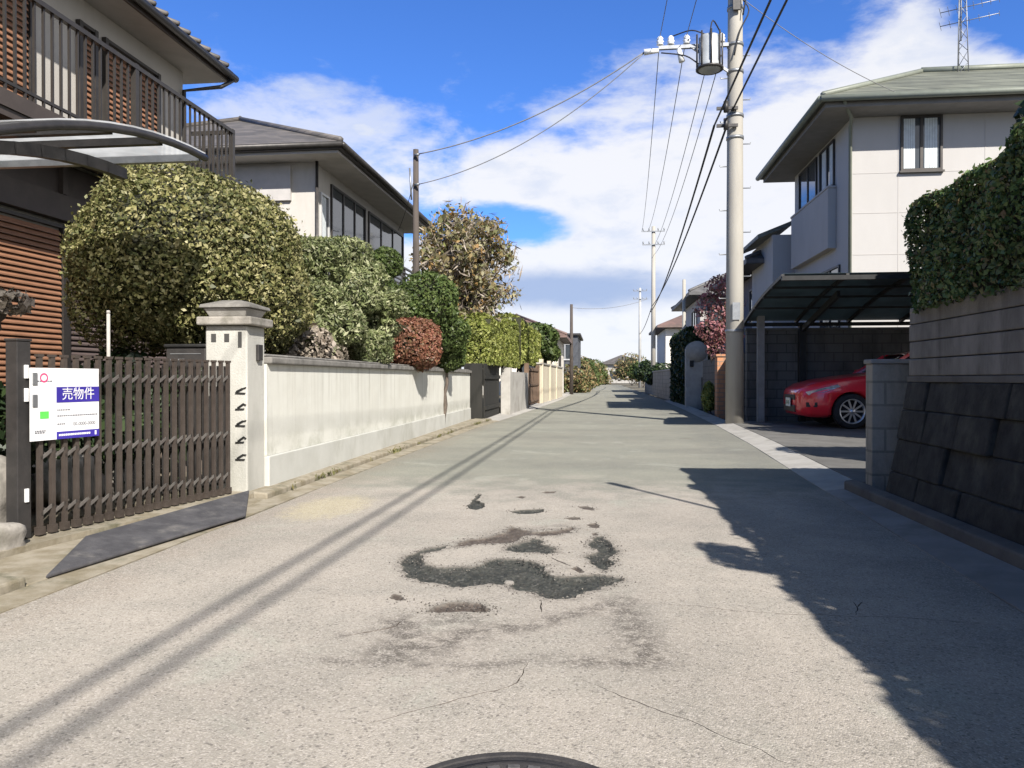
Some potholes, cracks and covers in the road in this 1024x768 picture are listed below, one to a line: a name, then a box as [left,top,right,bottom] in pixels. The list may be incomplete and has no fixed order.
pothole [429,602,491,613]
pothole [584,536,620,572]
pothole [454,527,575,547]
crack [357,663,528,727]
crack [586,681,794,765]
pothole [466,494,485,510]
pothole [399,545,624,599]
pothole [505,538,558,554]
